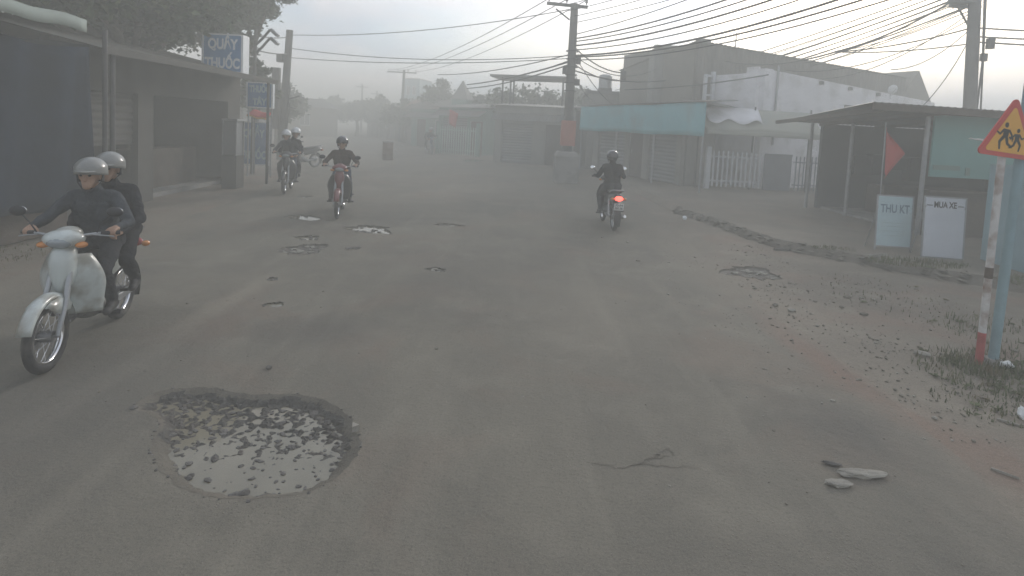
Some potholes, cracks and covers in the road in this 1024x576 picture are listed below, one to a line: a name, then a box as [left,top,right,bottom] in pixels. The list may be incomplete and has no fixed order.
pothole [277,243,329,256]
pothole [129,387,362,503]
pothole [343,225,392,234]
crack [587,447,701,468]
pothole [719,266,782,281]
